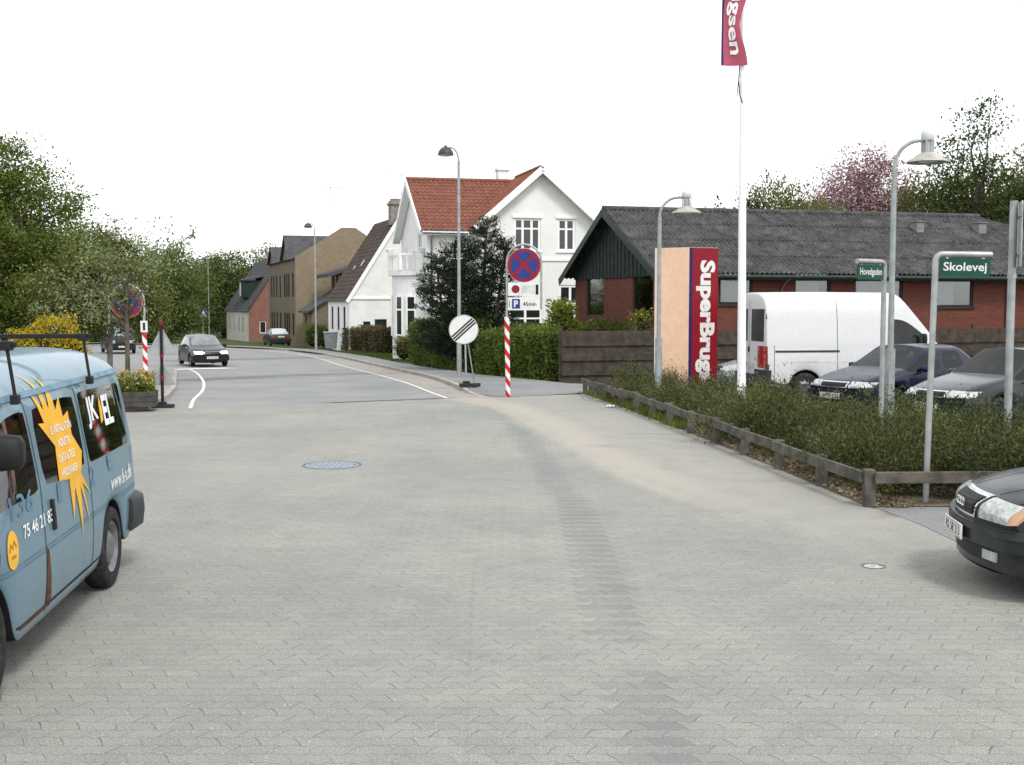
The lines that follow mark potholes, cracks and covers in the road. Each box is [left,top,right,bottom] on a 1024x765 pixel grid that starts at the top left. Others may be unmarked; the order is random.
manhole cover [302,461,362,469]
